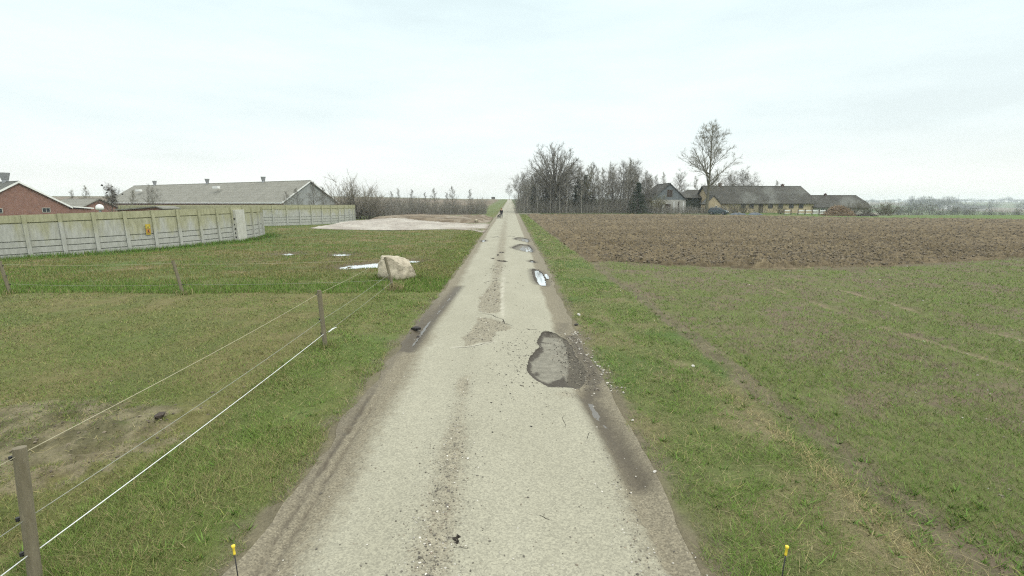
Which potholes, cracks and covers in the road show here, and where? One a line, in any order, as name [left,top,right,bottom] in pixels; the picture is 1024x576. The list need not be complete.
pothole [526,330,588,389]
